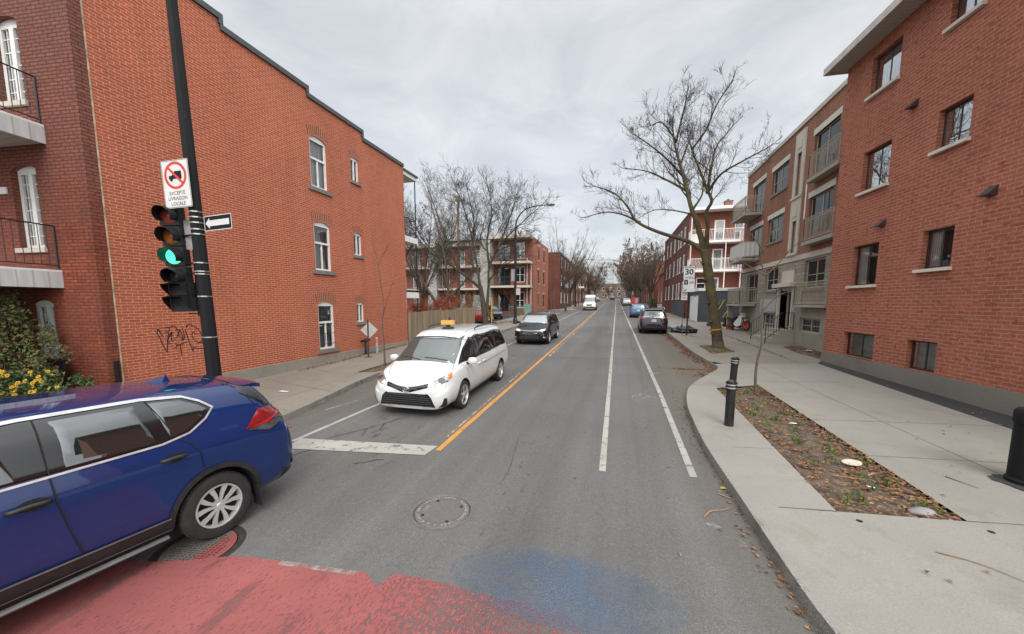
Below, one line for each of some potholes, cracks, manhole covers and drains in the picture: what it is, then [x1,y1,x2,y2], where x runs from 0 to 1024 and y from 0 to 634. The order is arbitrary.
manhole cover [409,494,474,531]
